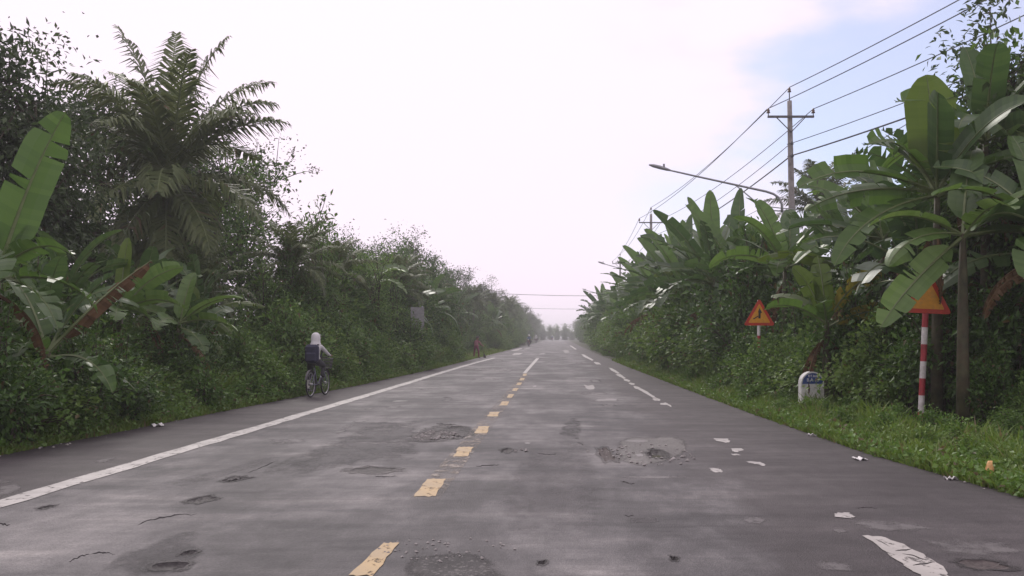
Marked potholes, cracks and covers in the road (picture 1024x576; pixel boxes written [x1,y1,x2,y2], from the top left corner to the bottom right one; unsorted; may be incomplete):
pothole [145,560,193,571]
pothole [595,446,620,463]
pothole [949,557,1022,571]
crack [139,514,194,525]
pothole [182,494,221,504]
pothole [342,465,404,474]
pothole [645,448,671,459]
pothole [410,429,451,442]
